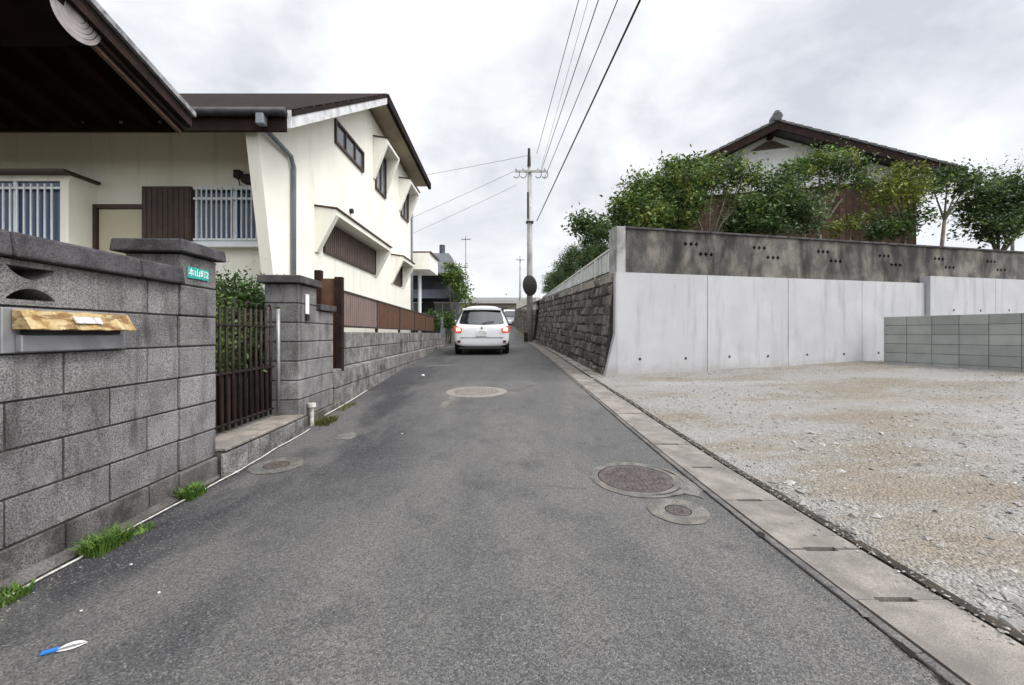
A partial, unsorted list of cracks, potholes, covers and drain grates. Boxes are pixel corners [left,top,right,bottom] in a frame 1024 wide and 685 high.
manhole cover [591,462,689,498]
manhole cover [647,498,710,524]
manhole cover [446,387,507,397]
manhole cover [248,457,304,474]
